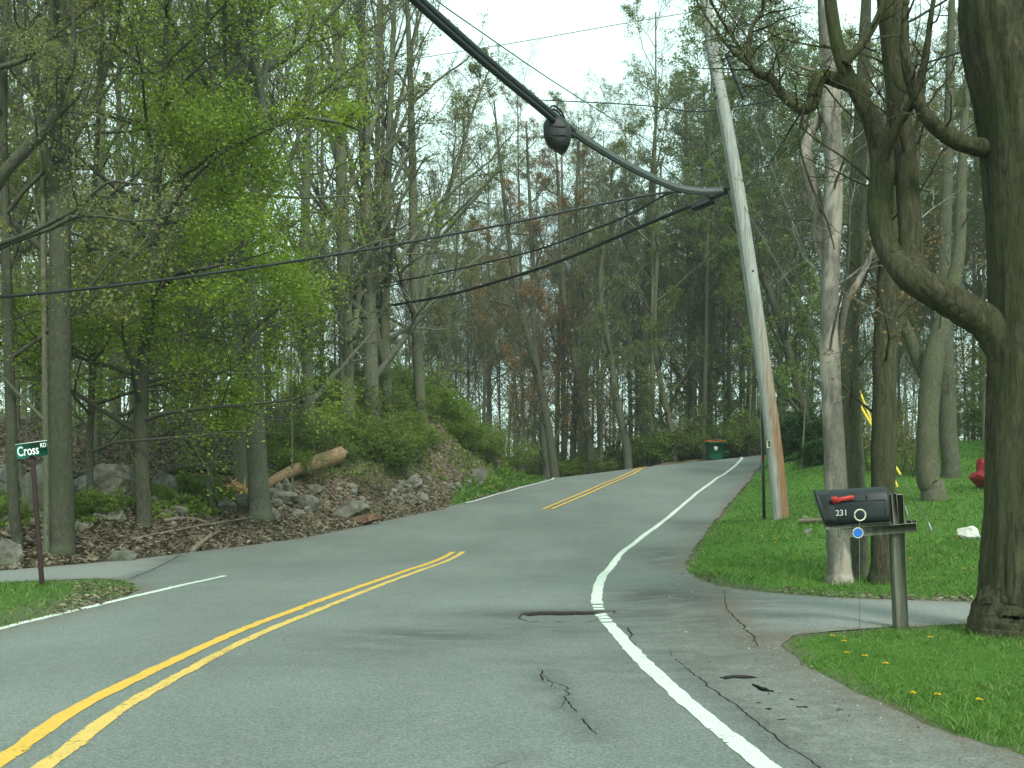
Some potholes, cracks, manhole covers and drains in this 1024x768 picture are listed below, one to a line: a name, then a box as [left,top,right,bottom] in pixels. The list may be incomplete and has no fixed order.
crack [670,651,821,768]
crack [539,670,597,734]
